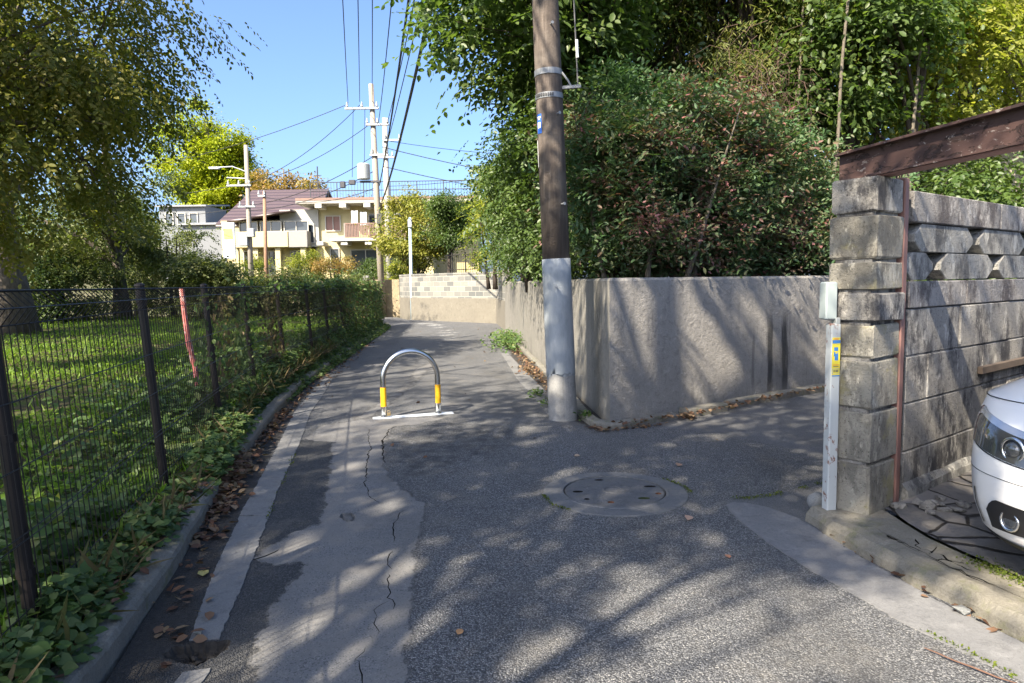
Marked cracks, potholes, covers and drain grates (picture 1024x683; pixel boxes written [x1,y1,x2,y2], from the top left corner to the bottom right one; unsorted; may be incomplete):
crack [374,513,400,631]
manhole cover [543,472,689,517]
crack [363,427,394,502]
crack [887,535,989,584]
pothole [339,513,356,522]
